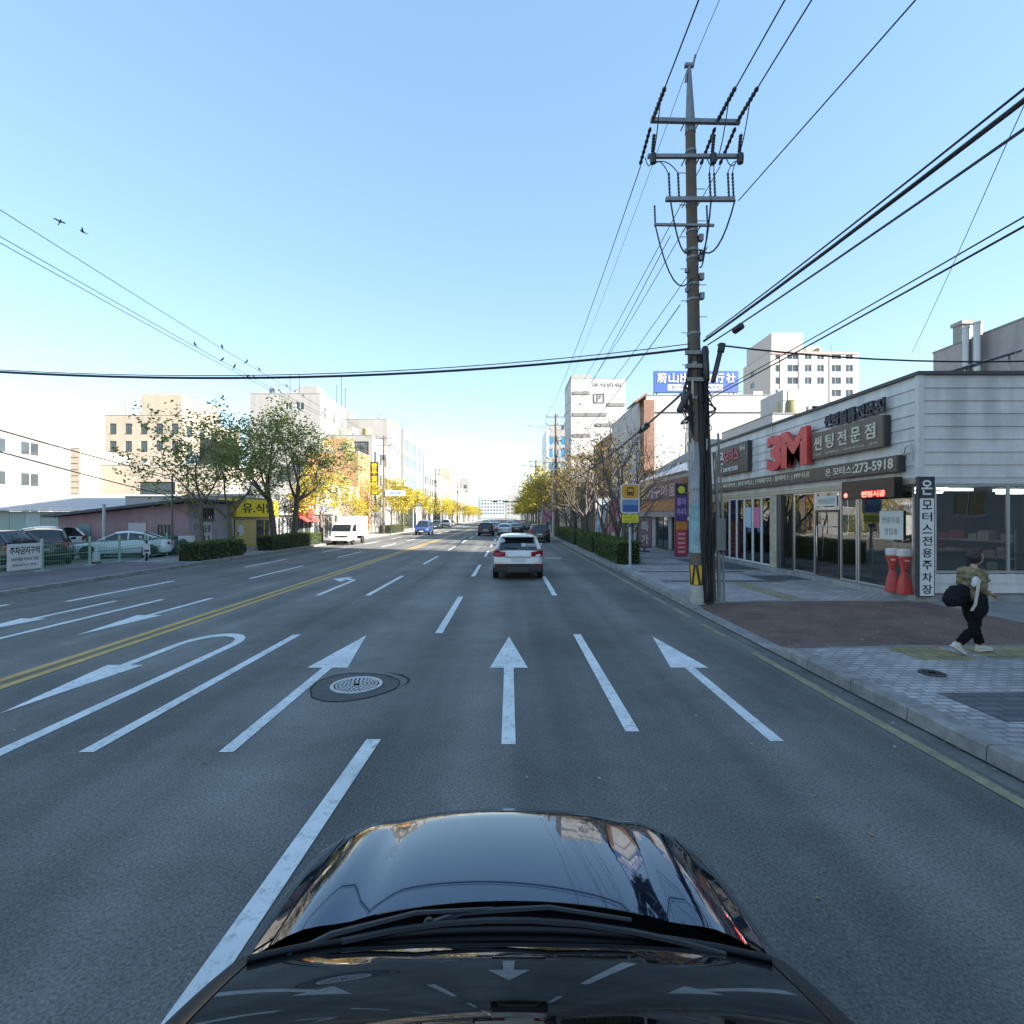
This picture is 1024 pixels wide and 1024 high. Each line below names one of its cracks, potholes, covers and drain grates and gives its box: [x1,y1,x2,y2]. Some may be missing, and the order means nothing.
manhole cover [918,669,947,677]
manhole cover [330,676,383,694]
